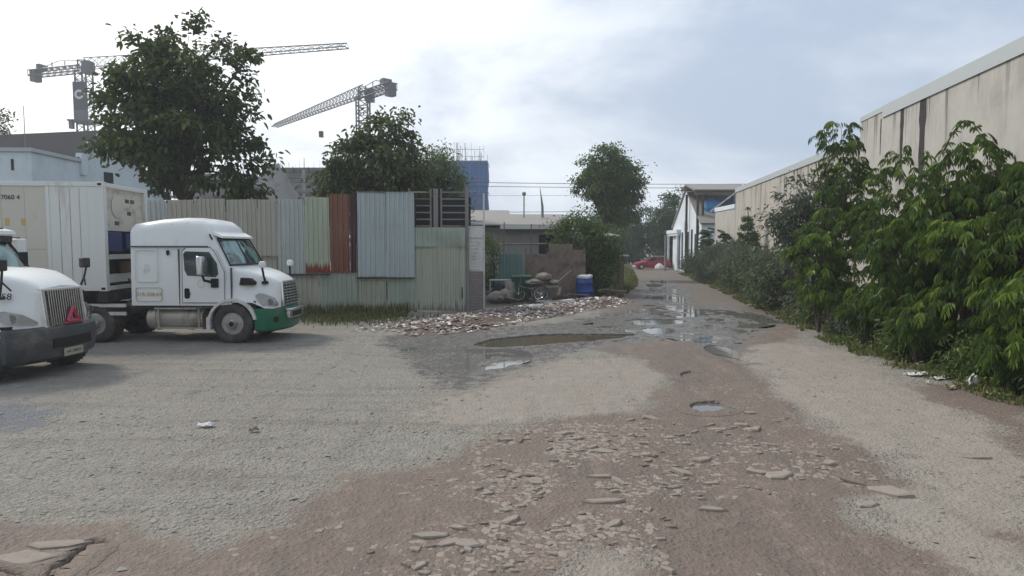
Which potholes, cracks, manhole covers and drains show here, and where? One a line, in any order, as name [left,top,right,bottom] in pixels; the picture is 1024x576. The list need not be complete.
pothole [689,343,757,363]
pothole [626,325,694,337]
pothole [610,317,702,327]
pothole [722,322,793,330]
pothole [671,397,745,416]
pothole [458,331,649,349]
